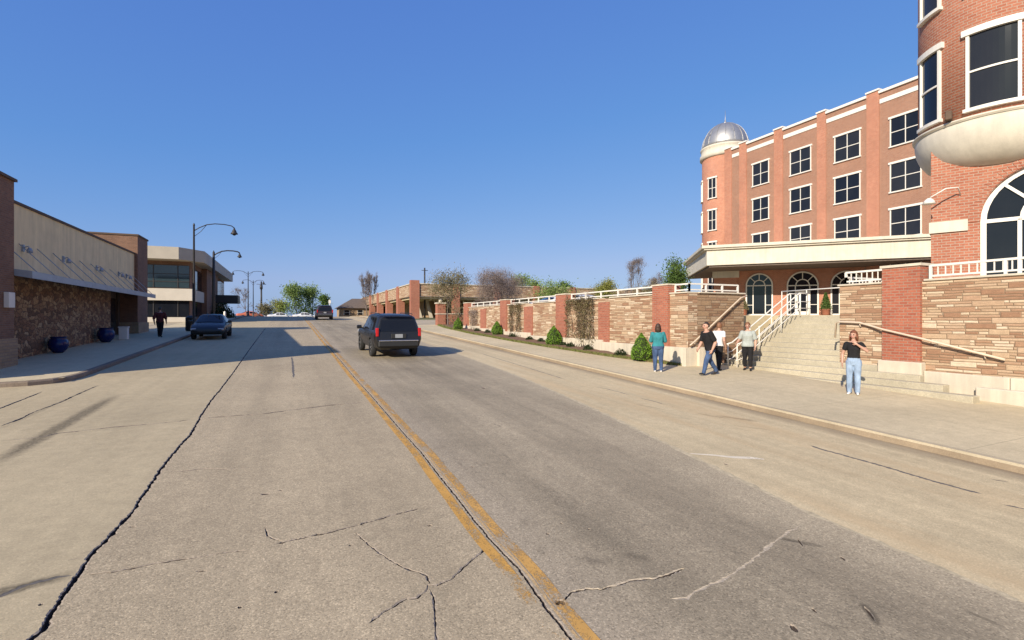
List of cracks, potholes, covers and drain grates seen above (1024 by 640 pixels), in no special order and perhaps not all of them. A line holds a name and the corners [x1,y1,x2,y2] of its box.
crack [564,525,800,600]
crack [2,329,484,640]
